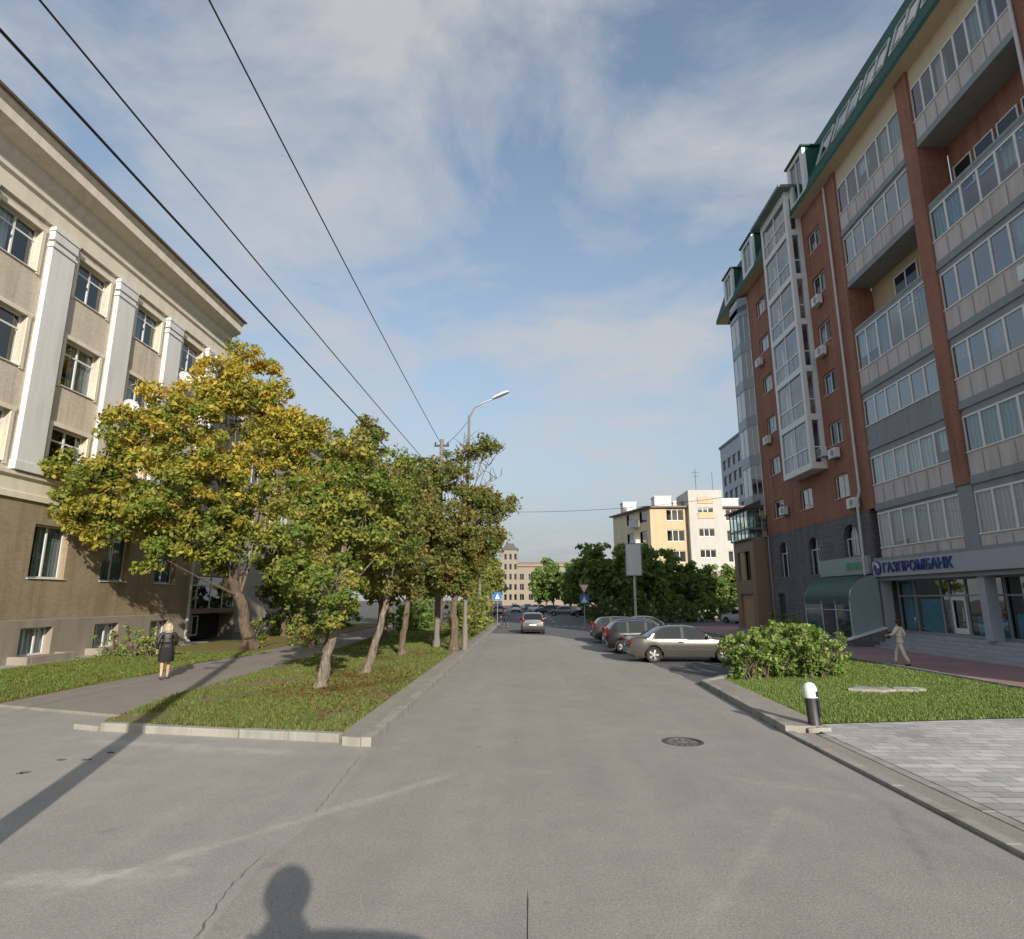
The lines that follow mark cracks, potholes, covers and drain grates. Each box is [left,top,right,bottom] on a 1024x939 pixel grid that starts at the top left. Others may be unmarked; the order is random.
crack [192,852,267,939]
manhole cover [661,737,704,747]
crack [314,756,361,813]
